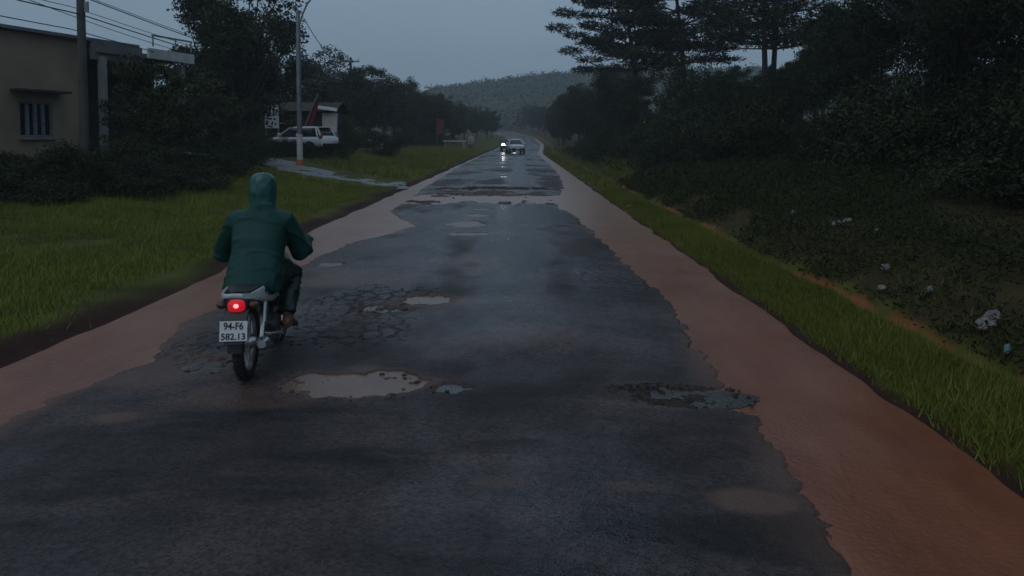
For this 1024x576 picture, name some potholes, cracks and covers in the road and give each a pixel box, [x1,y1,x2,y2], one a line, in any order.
crack [258,284,439,356]
pothole [602,382,760,411]
crack [156,327,227,366]
pothole [403,295,452,305]
pothole [429,381,472,394]
pothole [276,366,450,401]
